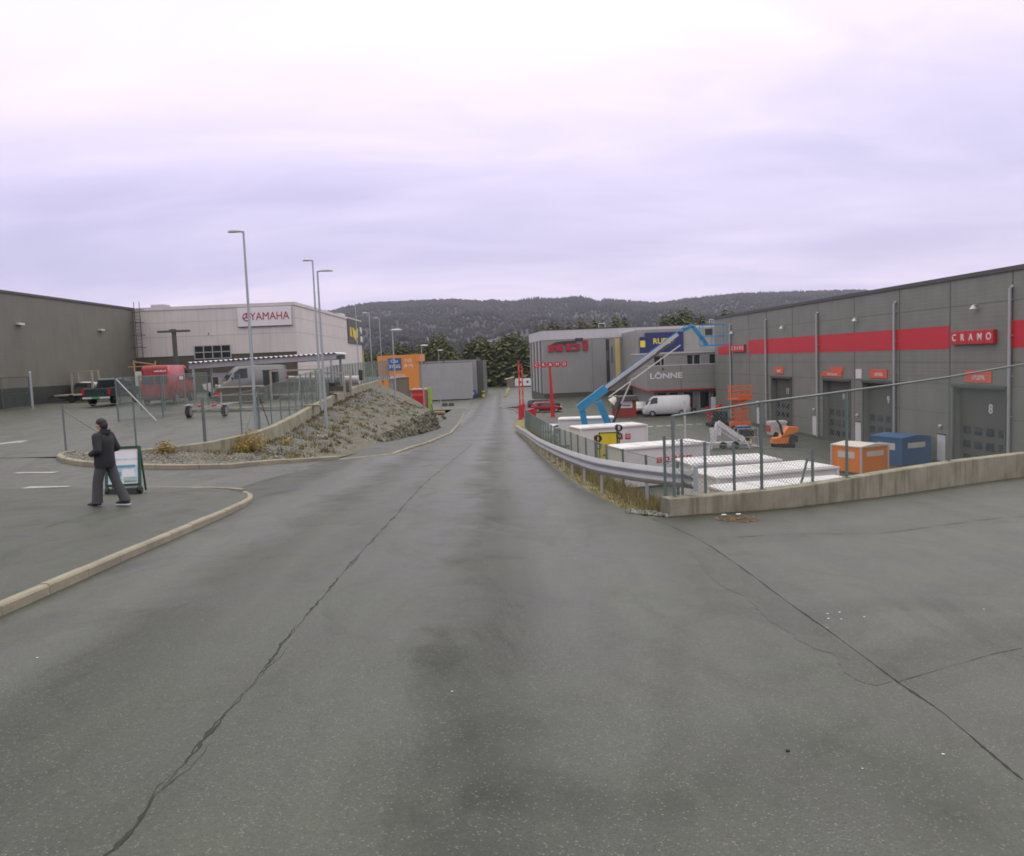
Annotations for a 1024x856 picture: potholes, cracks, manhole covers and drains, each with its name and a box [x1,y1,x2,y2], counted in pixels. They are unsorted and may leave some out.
crack [897,648,1019,682]
crack [103,444,472,856]
